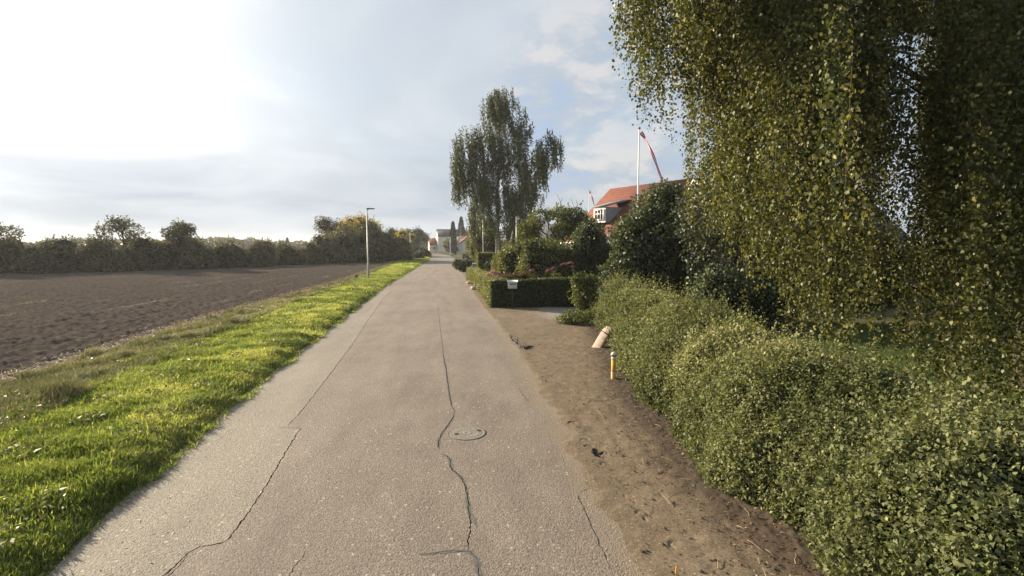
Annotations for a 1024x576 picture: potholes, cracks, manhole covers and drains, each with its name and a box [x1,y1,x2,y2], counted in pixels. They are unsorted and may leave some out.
manhole cover [449,426,486,440]
crack [578,488,611,567]
crack [420,308,483,576]
